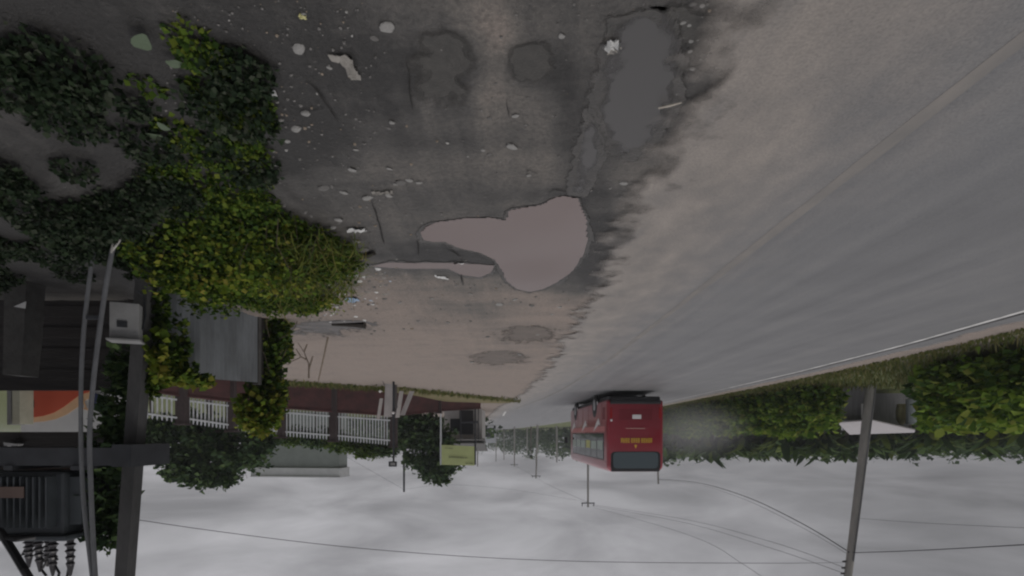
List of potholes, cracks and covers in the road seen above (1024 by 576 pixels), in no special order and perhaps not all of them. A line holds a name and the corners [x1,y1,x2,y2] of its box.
pothole [367,261,497,279]
pothole [415,196,594,293]
pothole [565,108,609,197]
pothole [585,9,692,162]
crack [372,203,385,245]
